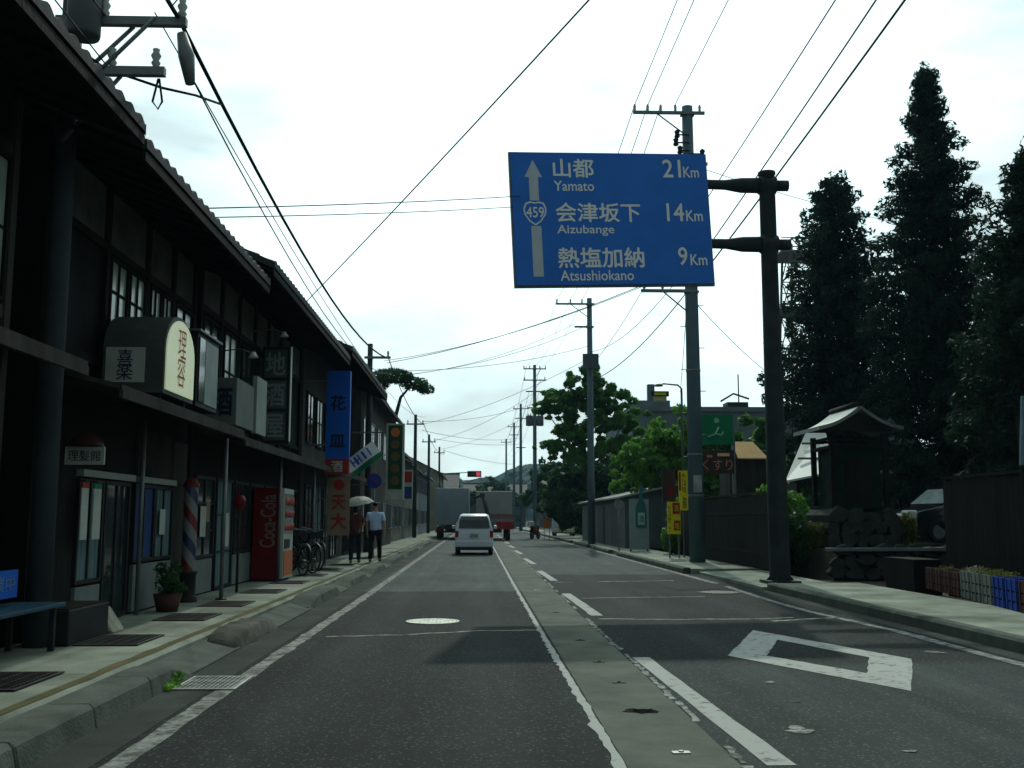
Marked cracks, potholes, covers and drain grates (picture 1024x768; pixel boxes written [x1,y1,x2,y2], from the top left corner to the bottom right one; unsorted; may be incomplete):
drain grate [72,634,165,646]
drain grate [172,676,254,690]
drain grate [152,613,222,621]
drain grate [0,671,65,691]
